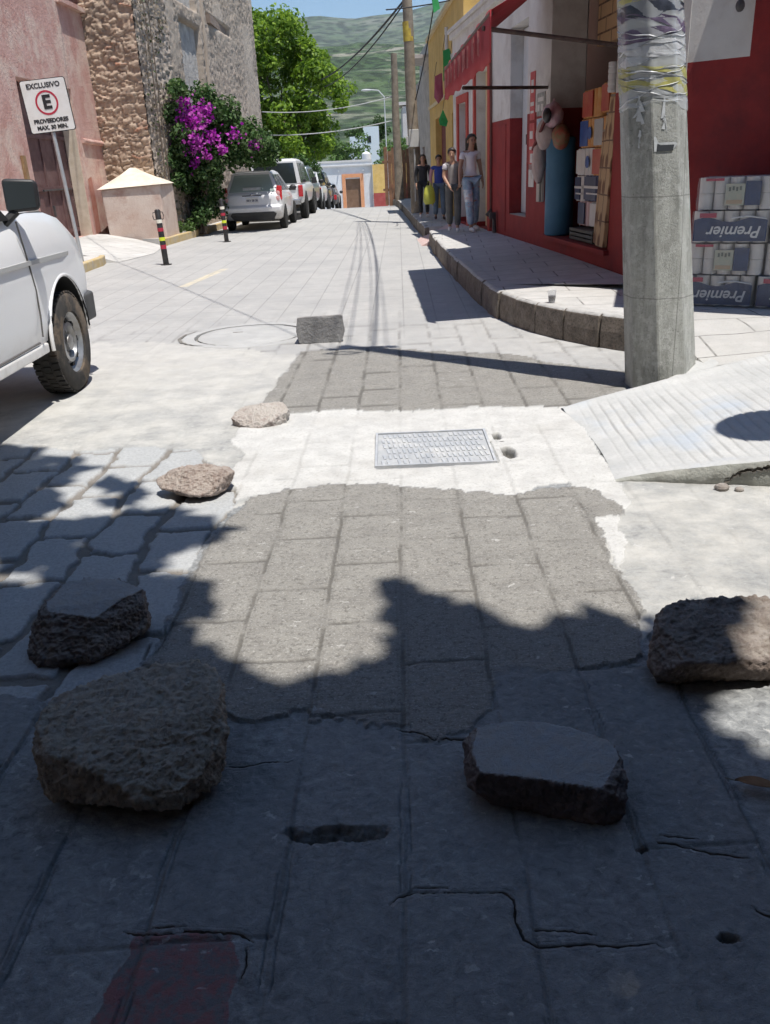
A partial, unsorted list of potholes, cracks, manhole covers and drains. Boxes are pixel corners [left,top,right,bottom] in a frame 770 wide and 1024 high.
pothole [486,431,508,442]
crack [654,832,751,863]
pothole [266,815,408,859]
manhole cover [177,322,298,349]
pothole [493,444,526,461]
crack [747,903,770,923]
crack [386,884,666,954]
crack [724,465,770,483]
